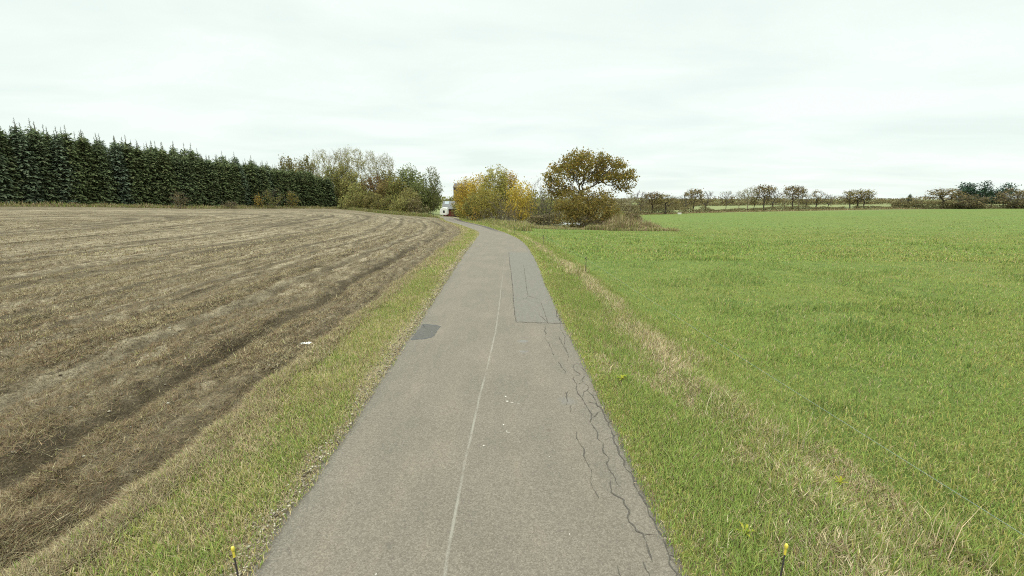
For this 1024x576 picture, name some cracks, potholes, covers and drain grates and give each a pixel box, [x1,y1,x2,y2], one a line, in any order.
crack [524,270,688,576]
